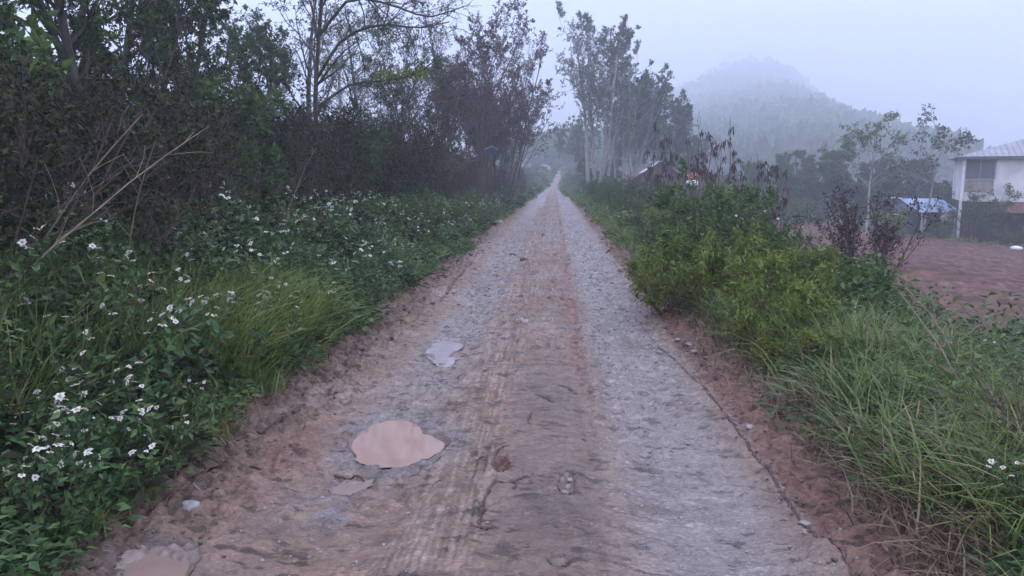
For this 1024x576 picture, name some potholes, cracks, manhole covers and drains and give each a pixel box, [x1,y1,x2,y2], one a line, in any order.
pothole [329,478,377,496]
crack [472,445,531,530]
pothole [347,420,451,469]
pothole [426,338,466,367]
pothole [558,472,575,495]
pothole [115,542,201,576]
